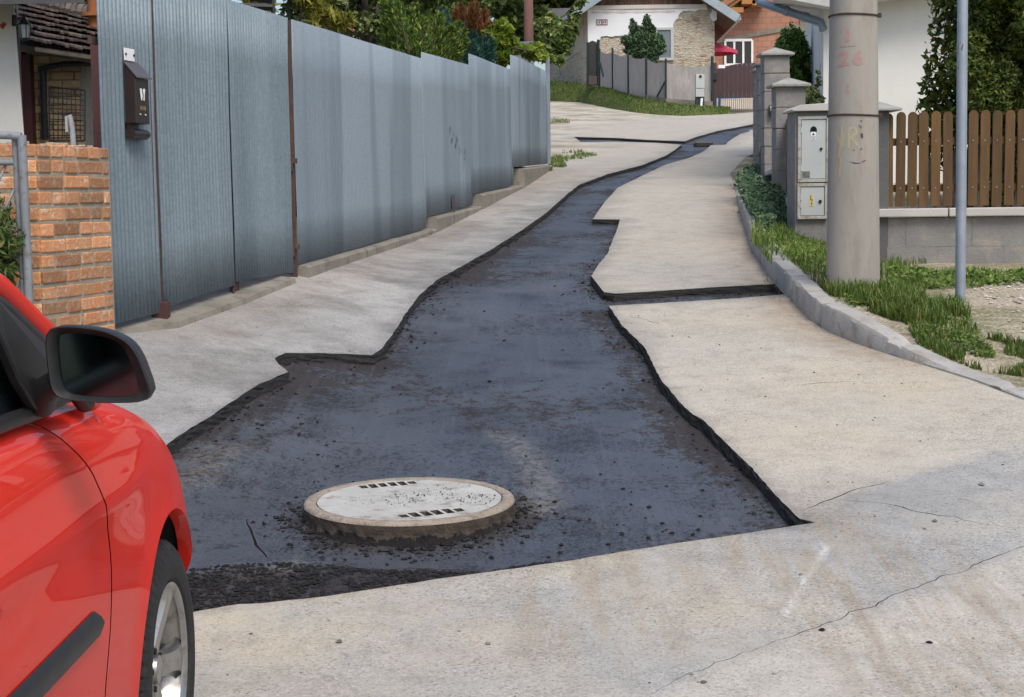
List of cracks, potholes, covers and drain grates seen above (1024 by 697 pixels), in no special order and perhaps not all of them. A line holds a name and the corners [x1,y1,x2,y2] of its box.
crack [246,519,271,559]
crack [800,482,1011,528]
manhole cover [303,477,515,548]
